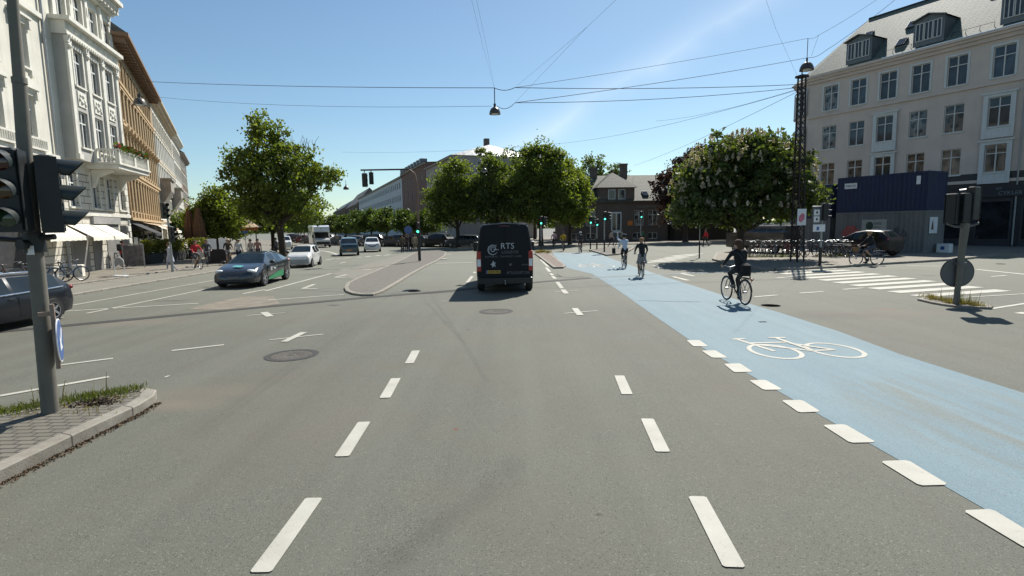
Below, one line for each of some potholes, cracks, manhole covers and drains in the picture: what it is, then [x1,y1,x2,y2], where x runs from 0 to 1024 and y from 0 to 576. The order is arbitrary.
manhole cover [264,349,319,361]
